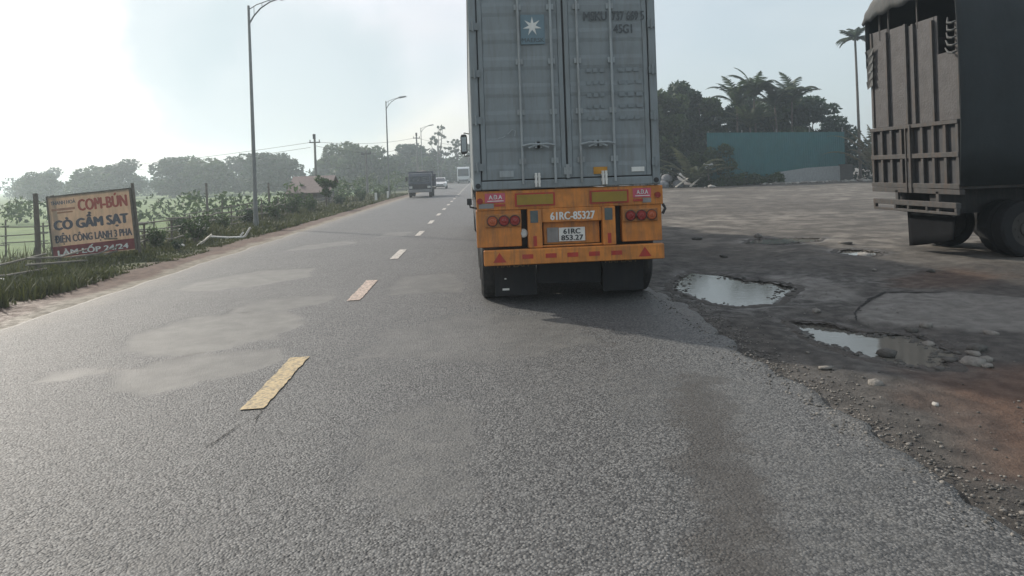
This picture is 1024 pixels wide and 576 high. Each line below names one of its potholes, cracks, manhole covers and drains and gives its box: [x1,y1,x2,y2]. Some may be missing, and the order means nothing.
pothole [664,271,806,309]
pothole [742,237,827,245]
pothole [781,318,978,372]
pothole [830,248,889,257]
